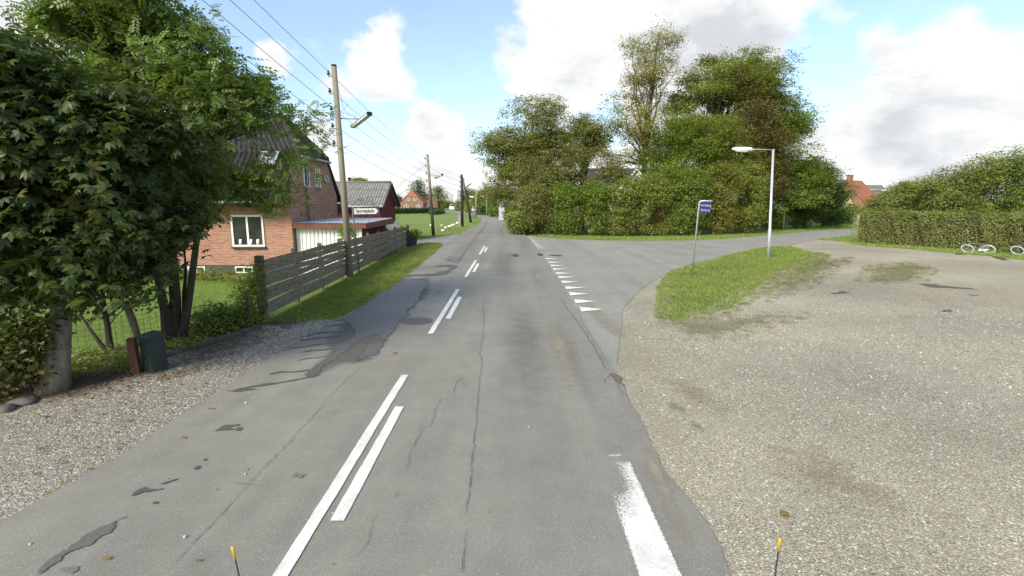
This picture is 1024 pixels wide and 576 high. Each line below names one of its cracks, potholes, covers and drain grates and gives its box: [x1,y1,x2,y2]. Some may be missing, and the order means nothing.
manhole cover [401,317,433,325]
crack [406,301,485,505]
